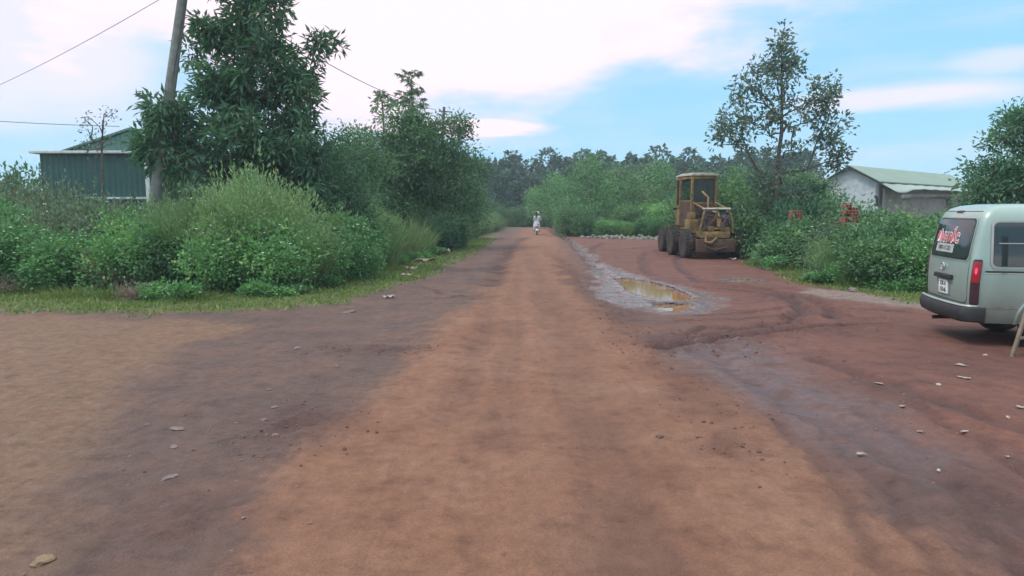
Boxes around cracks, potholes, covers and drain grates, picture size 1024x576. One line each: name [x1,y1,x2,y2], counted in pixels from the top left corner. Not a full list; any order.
pothole [640,301,709,314]
pothole [605,276,708,304]
